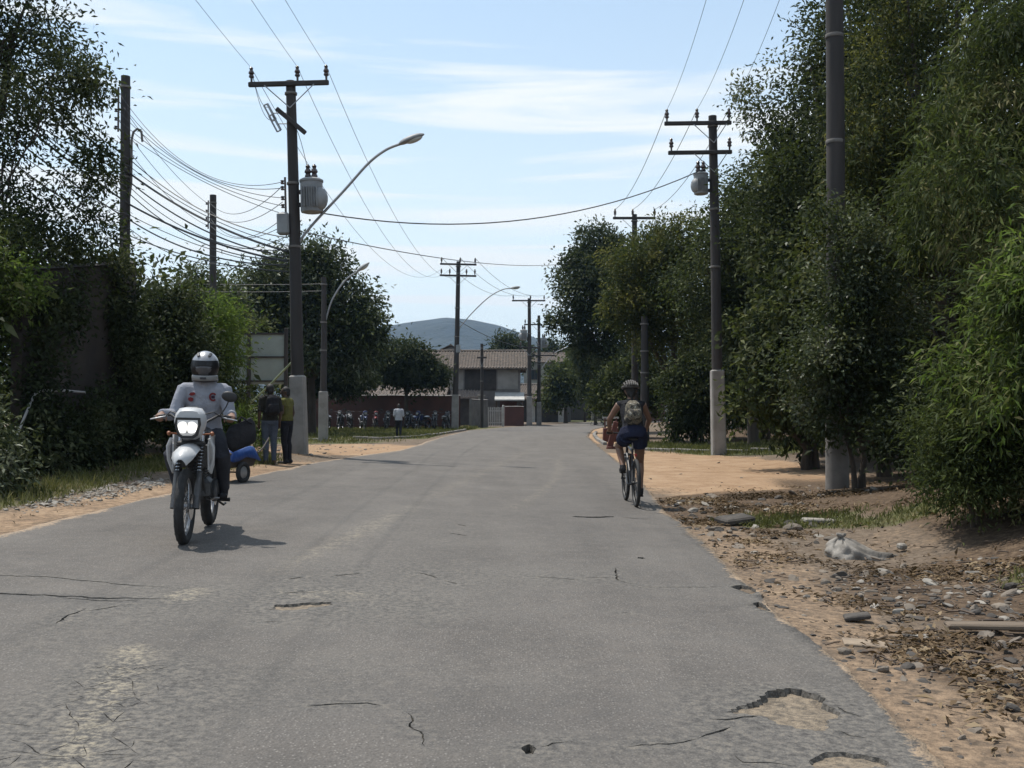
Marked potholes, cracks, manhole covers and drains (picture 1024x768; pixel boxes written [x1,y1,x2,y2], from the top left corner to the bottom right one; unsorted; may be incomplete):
pothole [809,752,891,768]
crack [0,575,153,607]
crack [0,665,167,768]
crack [409,715,425,745]
crack [637,716,756,746]
pothole [730,688,842,731]
